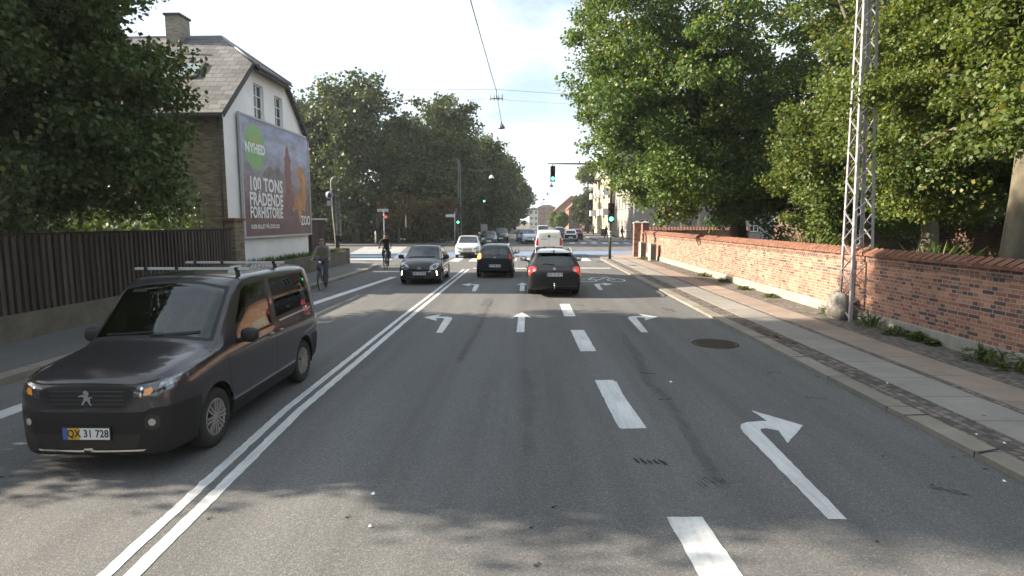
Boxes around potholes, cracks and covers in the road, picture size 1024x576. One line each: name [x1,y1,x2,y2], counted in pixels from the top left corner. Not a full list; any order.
manhole cover [691,339,740,349]
